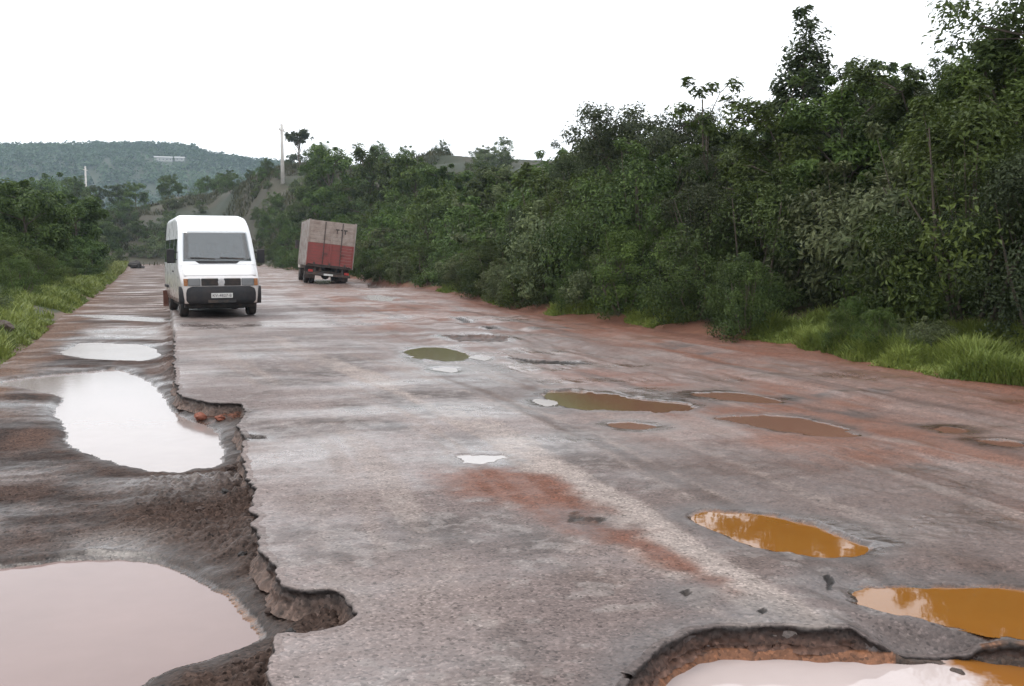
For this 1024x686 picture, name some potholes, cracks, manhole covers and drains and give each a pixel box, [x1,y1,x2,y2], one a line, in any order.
pothole [0,554,268,686]
pothole [689,391,790,404]
pothole [441,334,513,342]
pothole [401,347,475,362]
pothole [0,366,229,473]
pothole [841,581,1024,643]
pothole [713,414,863,437]
pothole [685,508,878,558]
pothole [535,389,699,413]
pothole [604,421,661,430]
pothole [929,425,972,433]
